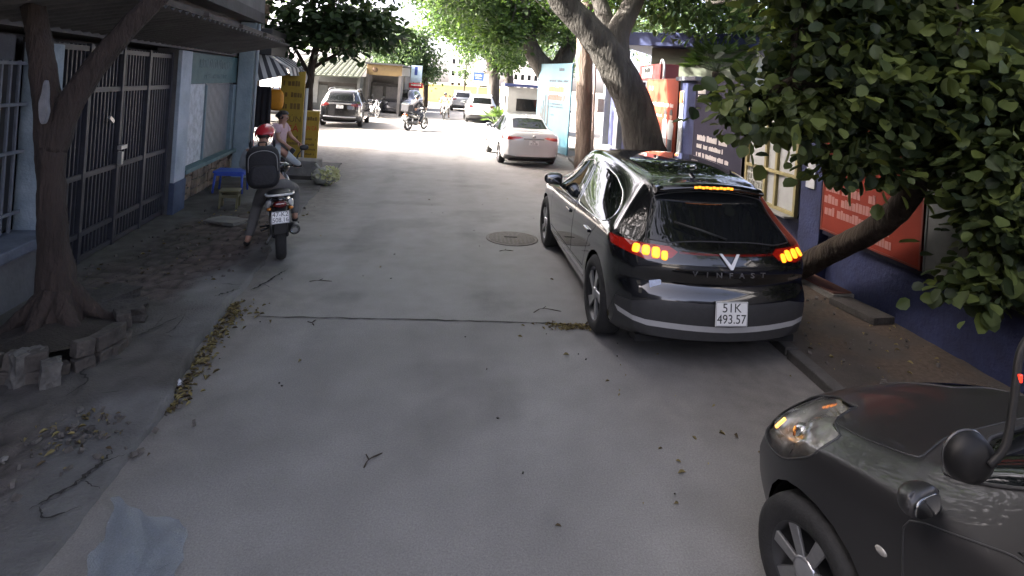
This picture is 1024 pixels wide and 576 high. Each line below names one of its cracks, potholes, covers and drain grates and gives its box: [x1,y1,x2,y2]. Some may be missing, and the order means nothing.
manhole cover [486,231,538,246]
crack [31,450,127,518]
